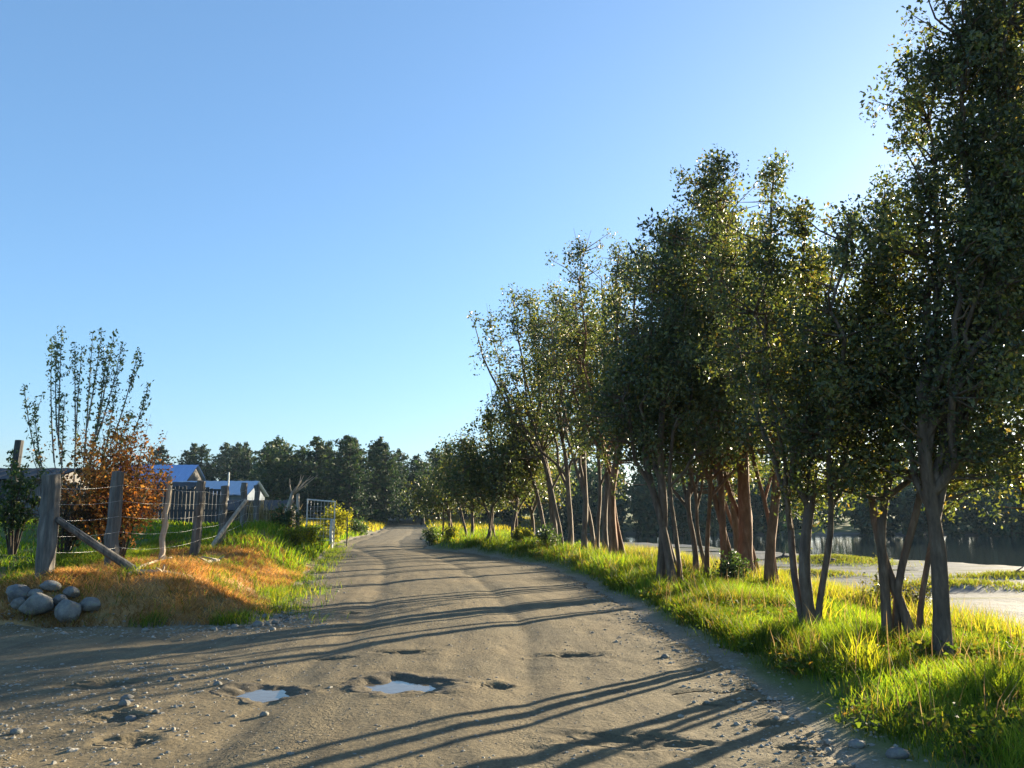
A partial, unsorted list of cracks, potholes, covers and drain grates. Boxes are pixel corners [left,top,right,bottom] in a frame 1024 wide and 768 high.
pothole [93,736,159,749]
pothole [209,682,319,704]
pothole [339,671,465,694]
